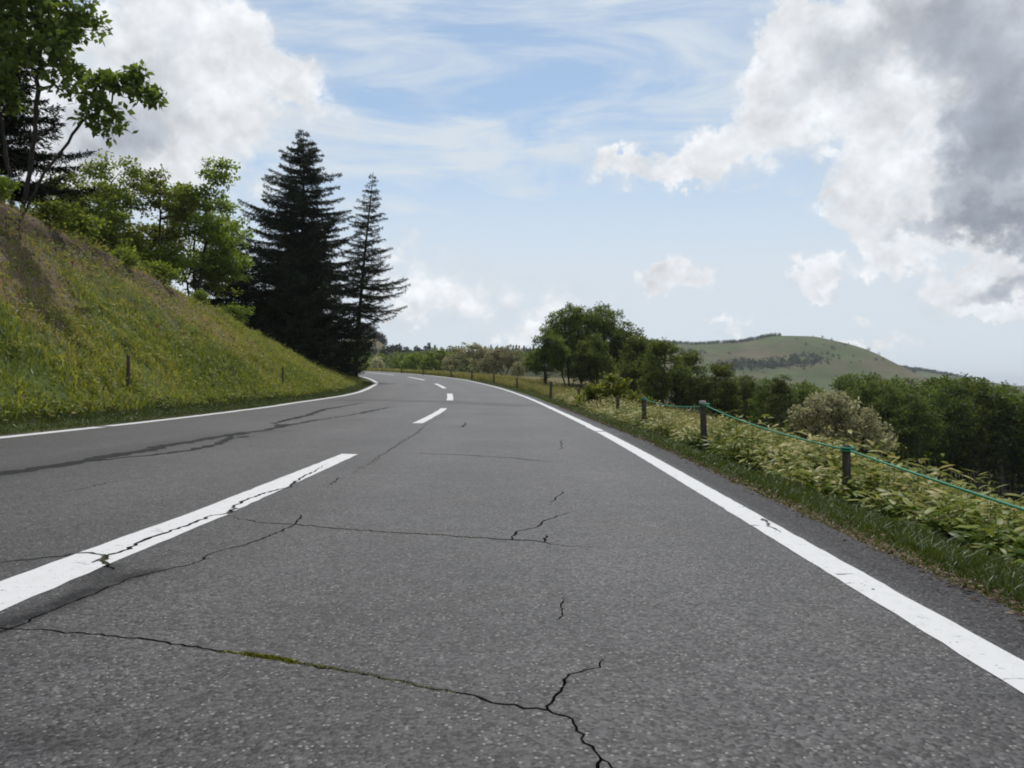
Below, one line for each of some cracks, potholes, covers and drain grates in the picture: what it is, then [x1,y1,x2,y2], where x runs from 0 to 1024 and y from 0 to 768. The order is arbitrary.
crack [0,403,393,490]
crack [330,414,562,485]
crack [0,468,613,768]
